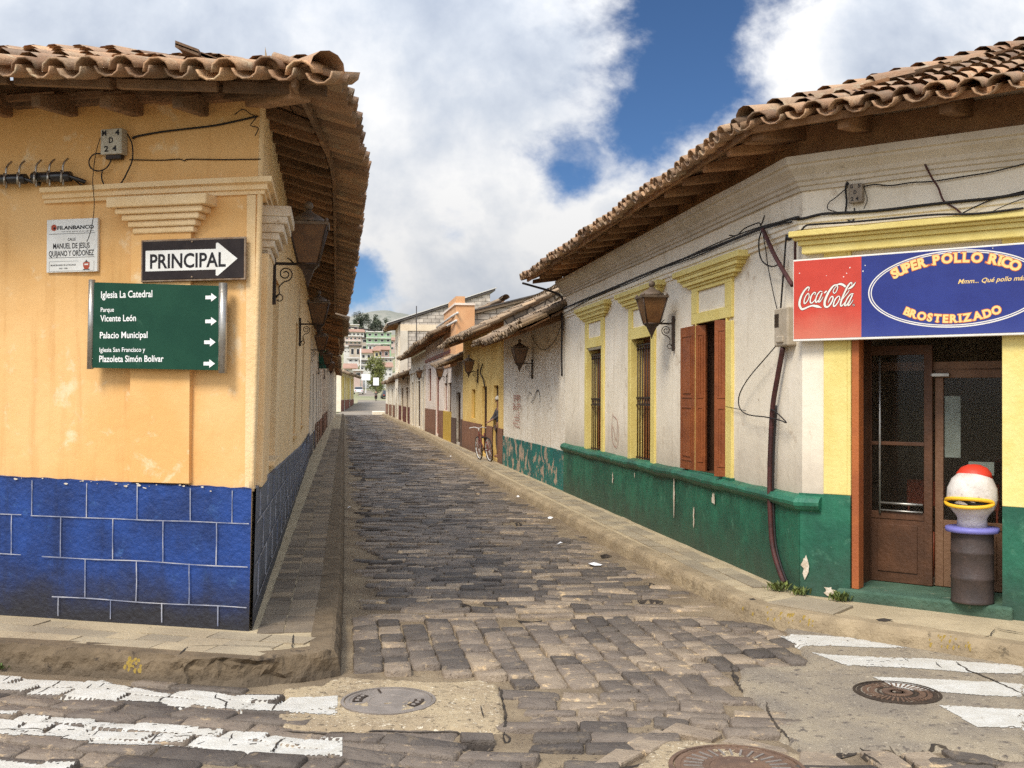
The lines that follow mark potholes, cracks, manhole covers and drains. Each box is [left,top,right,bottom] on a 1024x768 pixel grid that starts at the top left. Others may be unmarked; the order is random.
manhole cover [853,680,943,705]
manhole cover [668,744,805,768]
crack [730,664,743,692]
crack [480,687,507,734]
crack [936,661,1024,695]
manhole cover [340,687,436,715]
crack [766,702,790,742]
